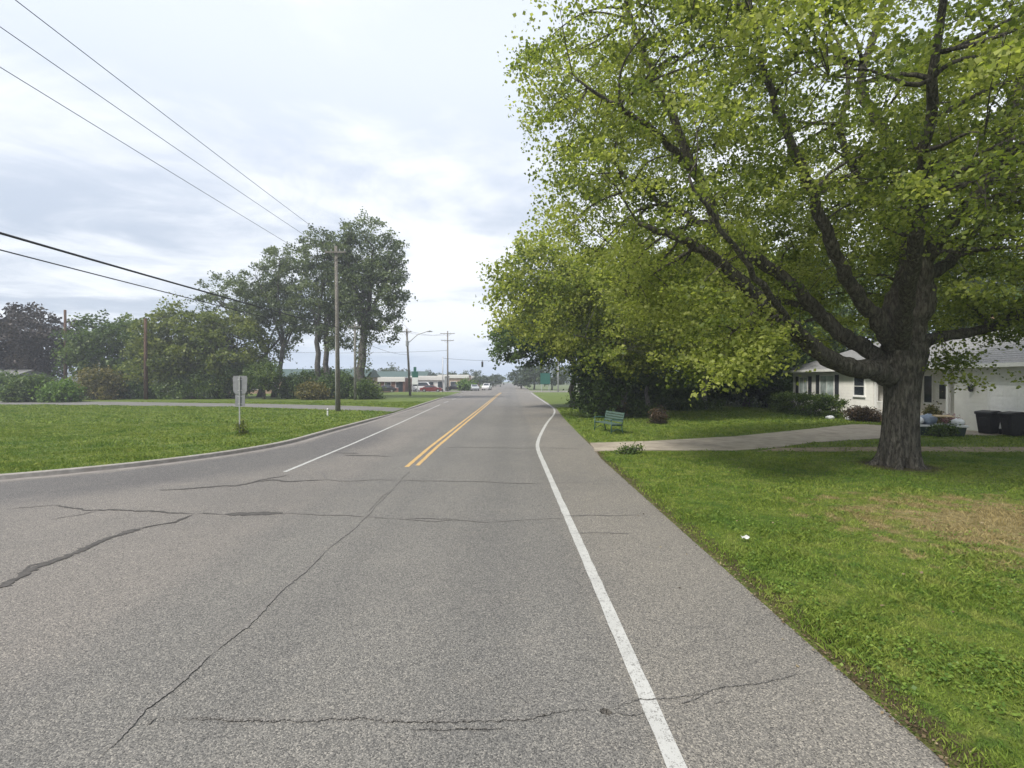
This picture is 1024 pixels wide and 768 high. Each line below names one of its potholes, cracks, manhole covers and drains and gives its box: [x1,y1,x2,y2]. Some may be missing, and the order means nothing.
crack [19,505,226,519]
crack [147,673,803,730]
